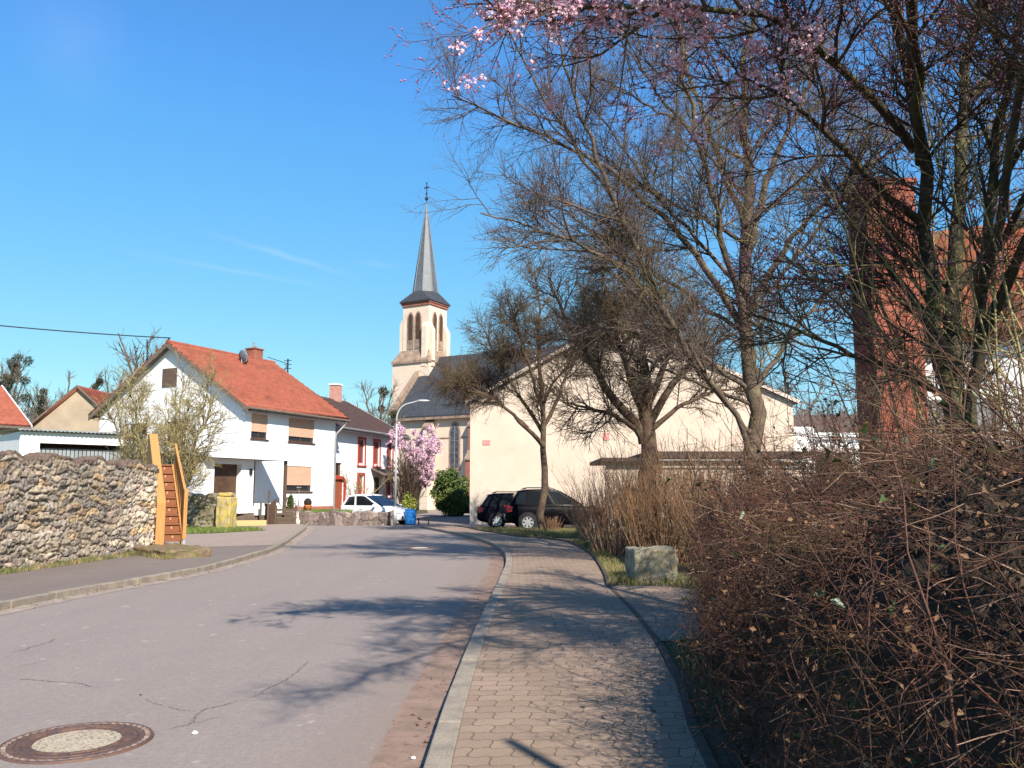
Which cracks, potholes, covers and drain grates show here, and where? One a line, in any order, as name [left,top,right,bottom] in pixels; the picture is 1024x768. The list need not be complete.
manhole cover [0,722,155,764]
crack [145,659,311,729]
